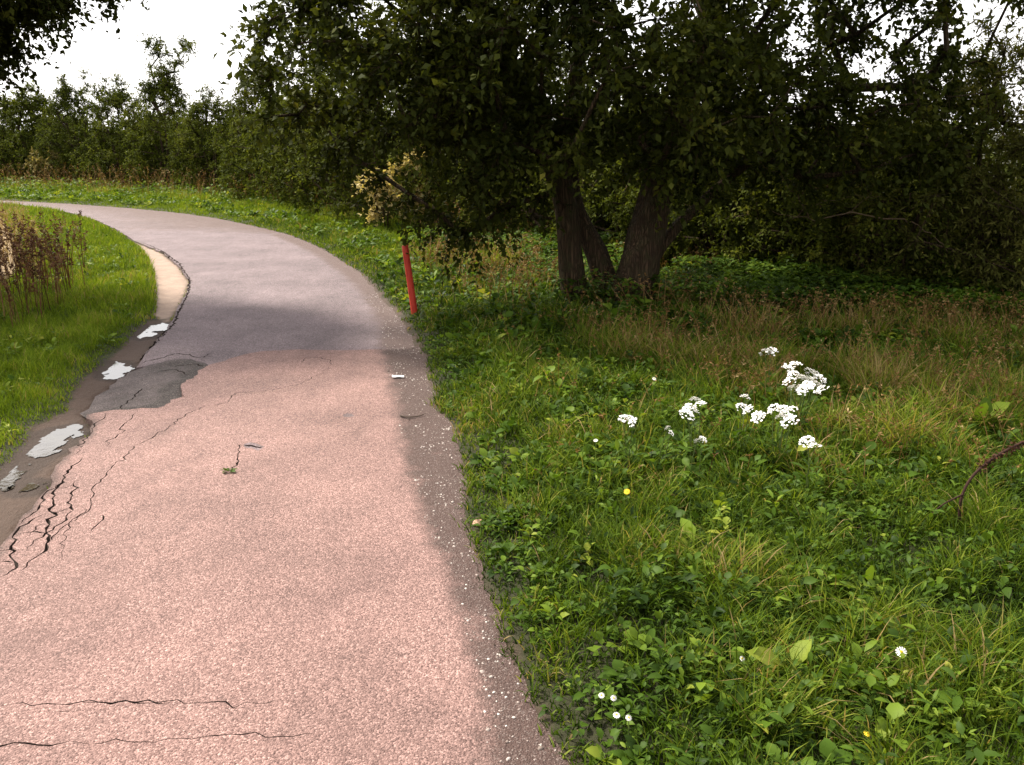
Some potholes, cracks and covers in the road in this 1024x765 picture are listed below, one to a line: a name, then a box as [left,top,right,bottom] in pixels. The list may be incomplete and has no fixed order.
crack [0,732,327,747]
crack [3,699,296,712]
crack [3,367,329,576]
